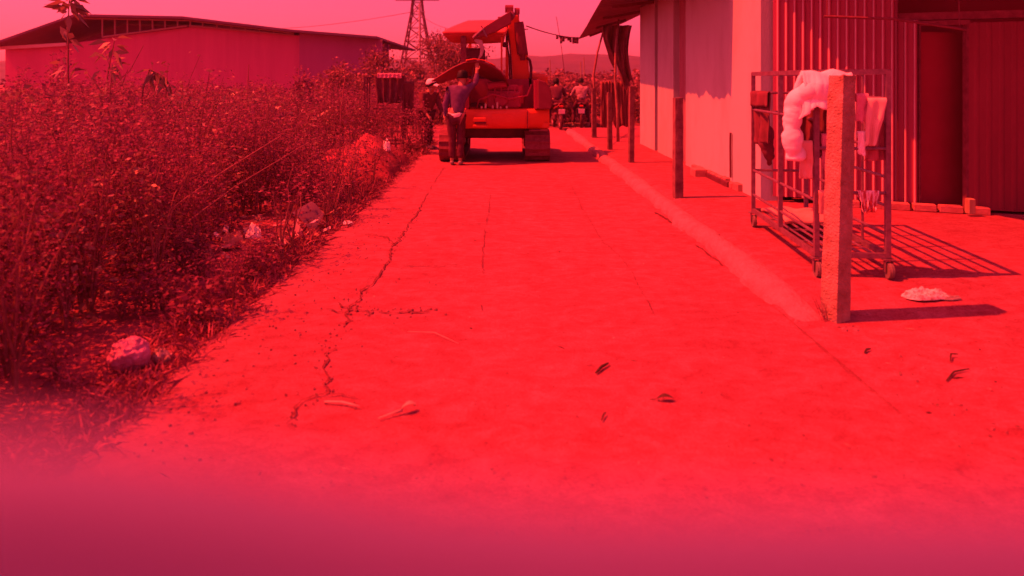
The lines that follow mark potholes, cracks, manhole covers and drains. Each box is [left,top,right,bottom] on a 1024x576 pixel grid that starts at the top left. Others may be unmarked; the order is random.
crack [275,169,491,426]
